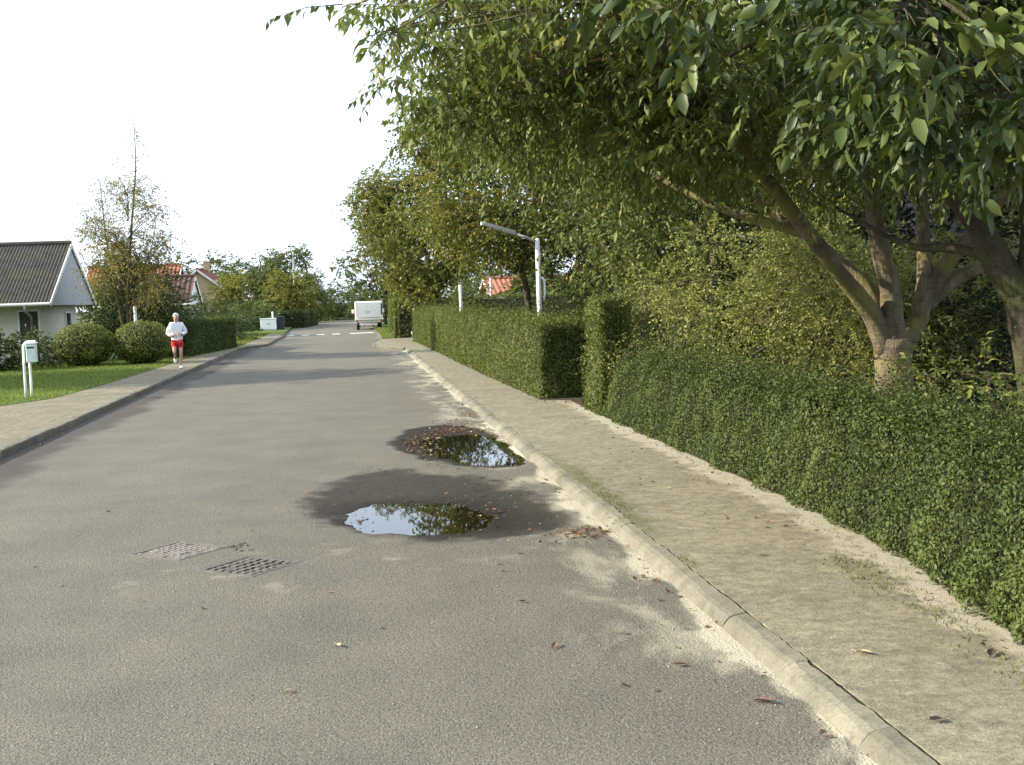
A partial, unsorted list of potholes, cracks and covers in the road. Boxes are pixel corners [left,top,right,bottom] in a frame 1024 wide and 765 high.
pothole [385,424,528,468]
pothole [296,468,585,543]
